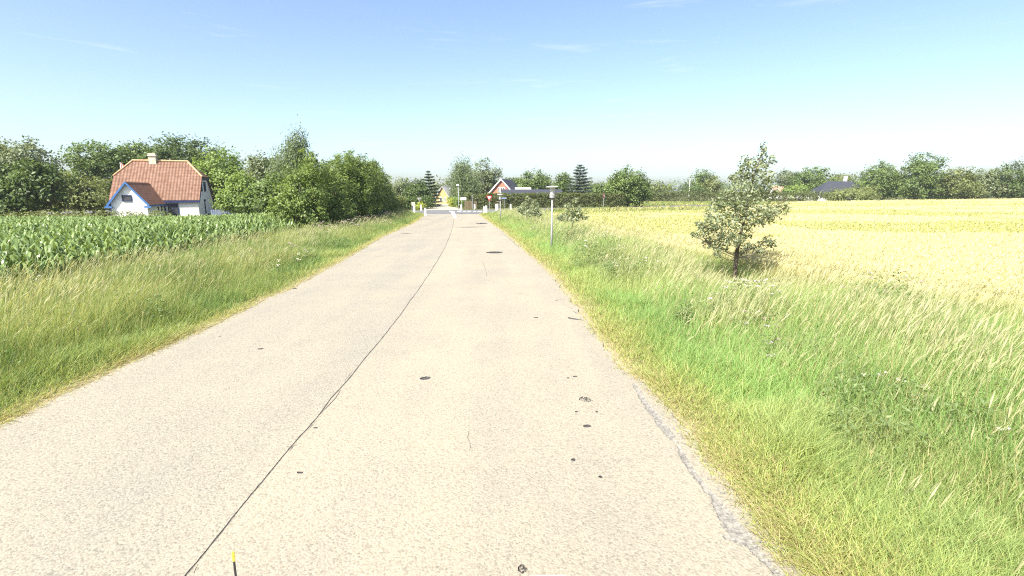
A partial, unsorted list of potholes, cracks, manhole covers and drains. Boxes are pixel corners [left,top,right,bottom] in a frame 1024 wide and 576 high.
crack [632,383,784,576]
